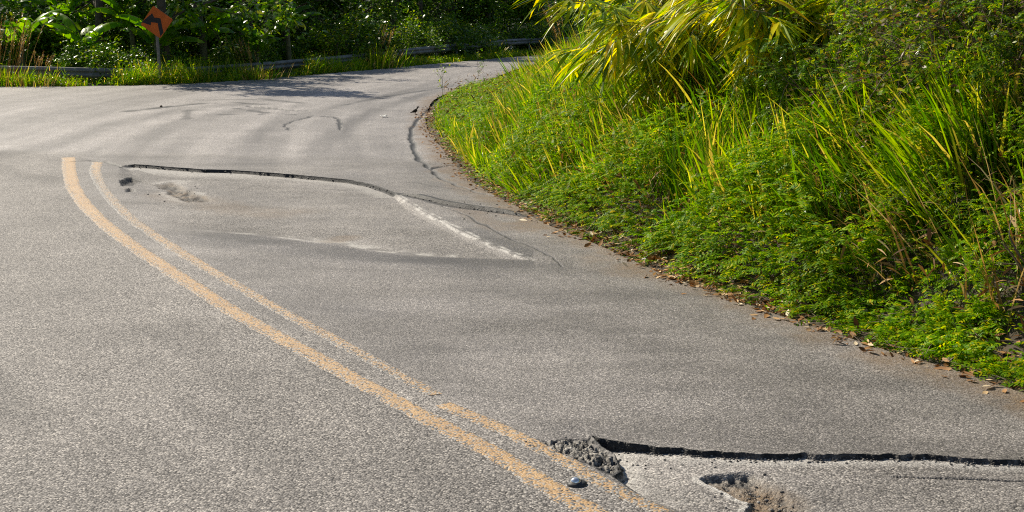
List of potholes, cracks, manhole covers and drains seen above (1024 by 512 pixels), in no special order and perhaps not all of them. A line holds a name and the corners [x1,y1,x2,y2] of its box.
crack [253,107,343,130]
pothole [536,436,621,476]
crack [393,111,561,266]
